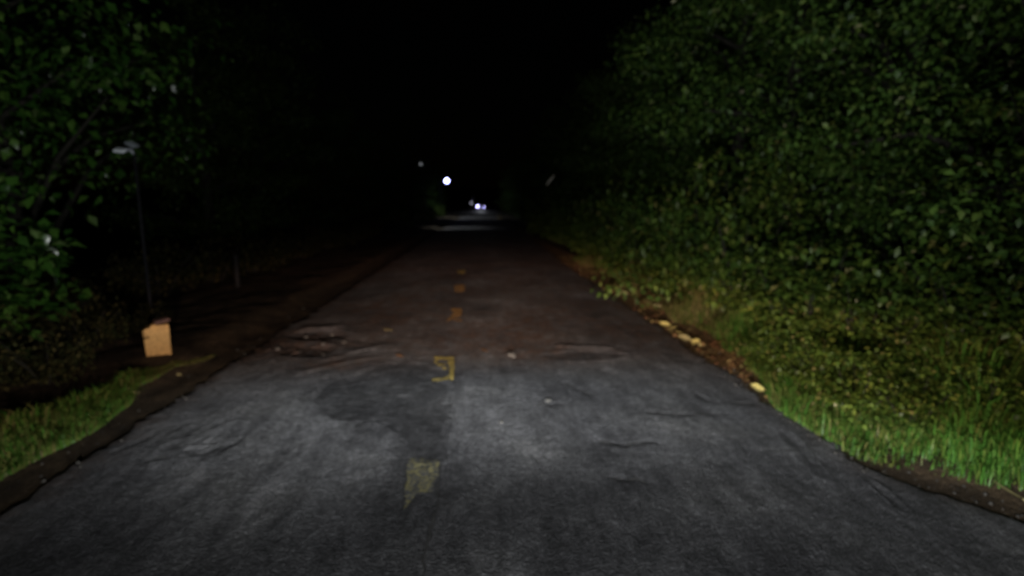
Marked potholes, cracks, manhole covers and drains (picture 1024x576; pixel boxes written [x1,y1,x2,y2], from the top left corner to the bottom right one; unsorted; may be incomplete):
pothole [267,341,342,358]
crack [646,401,753,416]
pothole [281,327,354,341]
